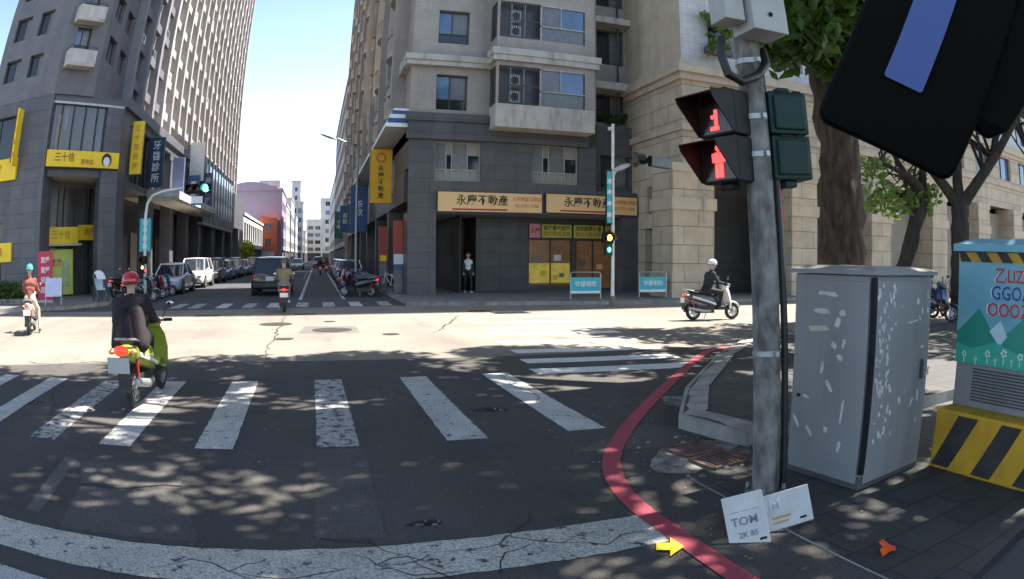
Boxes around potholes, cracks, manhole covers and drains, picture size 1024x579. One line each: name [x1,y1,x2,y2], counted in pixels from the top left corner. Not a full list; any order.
crack [312,512,642,579]
drain grate [637,436,753,478]
